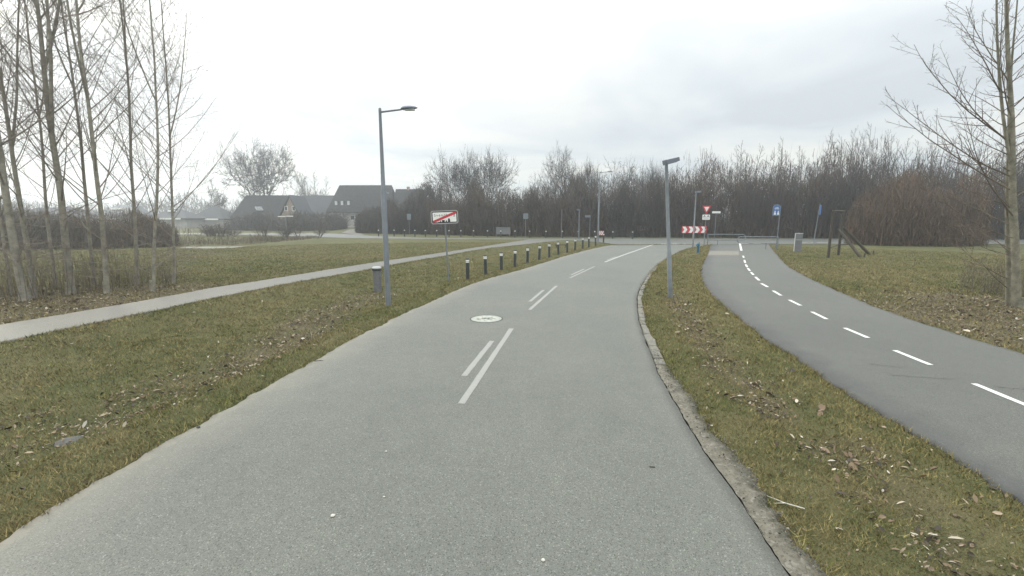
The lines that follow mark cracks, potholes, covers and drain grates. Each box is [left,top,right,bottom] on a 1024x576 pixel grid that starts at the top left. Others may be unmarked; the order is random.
manhole cover [470,315,503,323]
